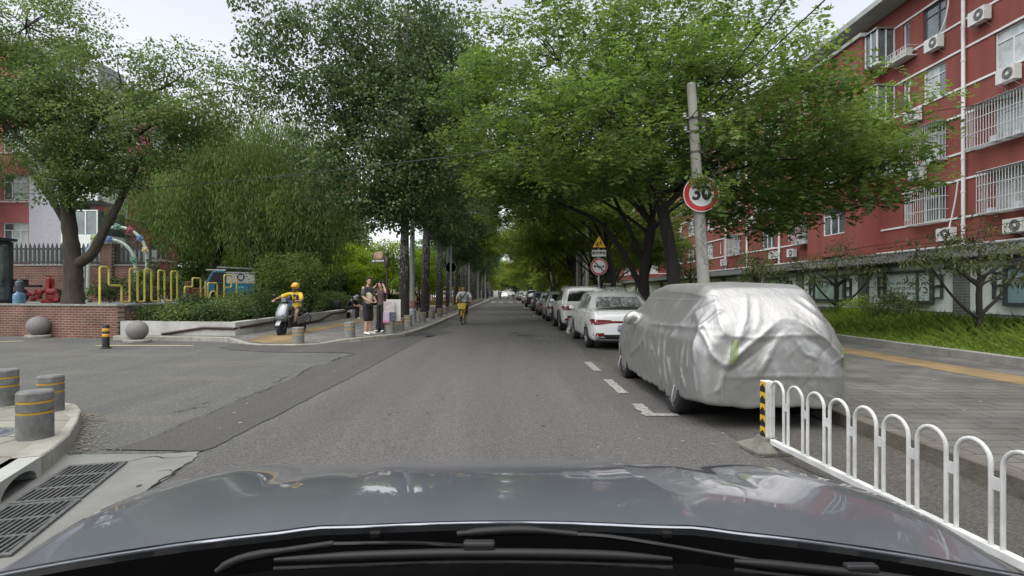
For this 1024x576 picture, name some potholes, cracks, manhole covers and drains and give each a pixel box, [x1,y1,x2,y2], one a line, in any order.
drain grate [8,461,128,504]
crack [131,456,190,490]
drain grate [0,456,41,503]
drain grate [0,498,82,558]
